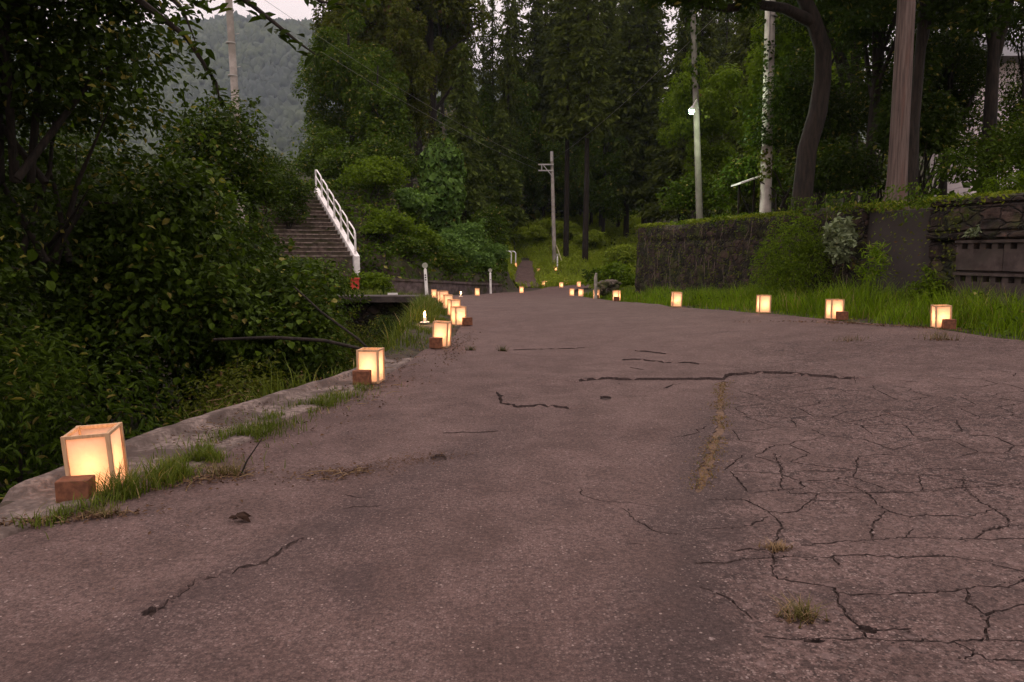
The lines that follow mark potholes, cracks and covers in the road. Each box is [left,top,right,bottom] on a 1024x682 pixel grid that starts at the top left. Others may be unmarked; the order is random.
crack [579,350,1024,661]
crack [496,391,569,409]
